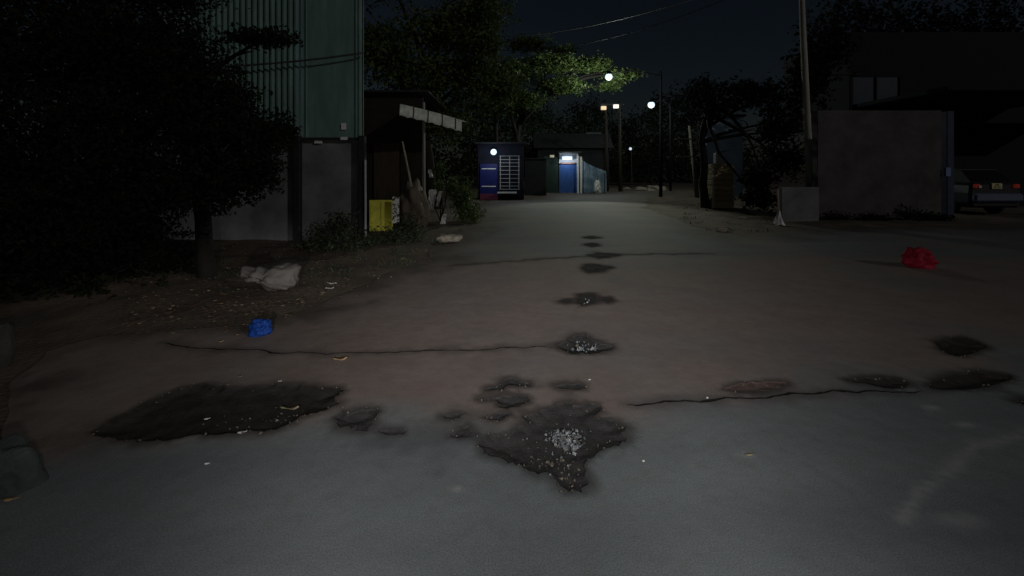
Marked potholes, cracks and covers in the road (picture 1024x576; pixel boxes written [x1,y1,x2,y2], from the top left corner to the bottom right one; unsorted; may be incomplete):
pothole [582,264,612,273]
crack [462,253,706,265]
crack [167,343,552,355]
pothole [90,383,344,442]
pothole [724,381,788,393]
pothole [926,369,1013,393]
pothole [334,406,381,431]
crack [629,390,920,406]
pothole [576,293,597,305]
pothole [935,337,987,357]
pothole [475,394,531,409]
pothole [557,334,614,355]
